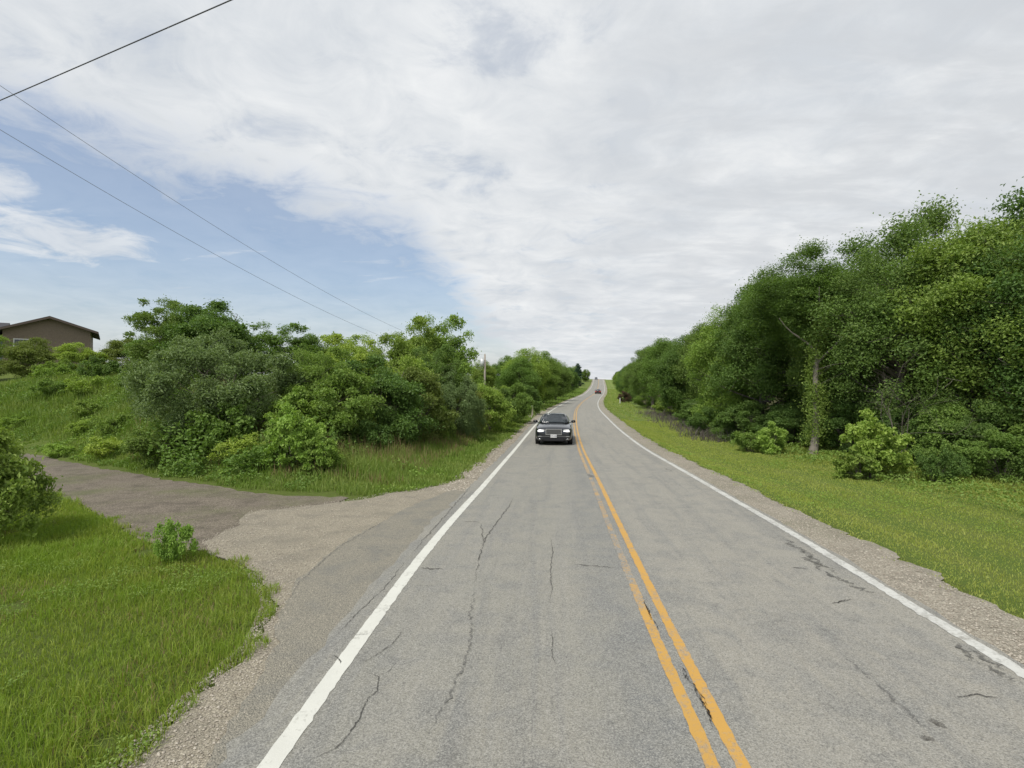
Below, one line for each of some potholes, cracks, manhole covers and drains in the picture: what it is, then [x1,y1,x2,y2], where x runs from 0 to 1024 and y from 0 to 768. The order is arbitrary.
crack [314,631,402,758]
crack [783,537,873,603]
crack [333,491,513,733]
crack [683,668,712,726]
crack [954,641,1014,679]
crack [848,660,920,724]
